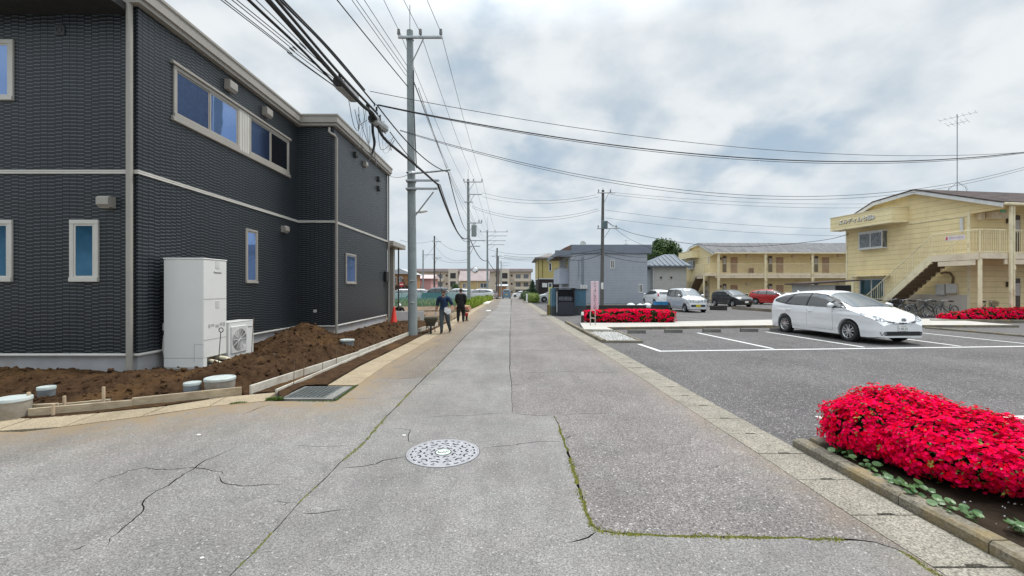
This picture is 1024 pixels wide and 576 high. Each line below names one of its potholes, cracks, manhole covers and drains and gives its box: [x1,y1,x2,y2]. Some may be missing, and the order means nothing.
drain grate [279,386,352,401]
crack [72,447,290,551]
manhole cover [406,439,480,468]
